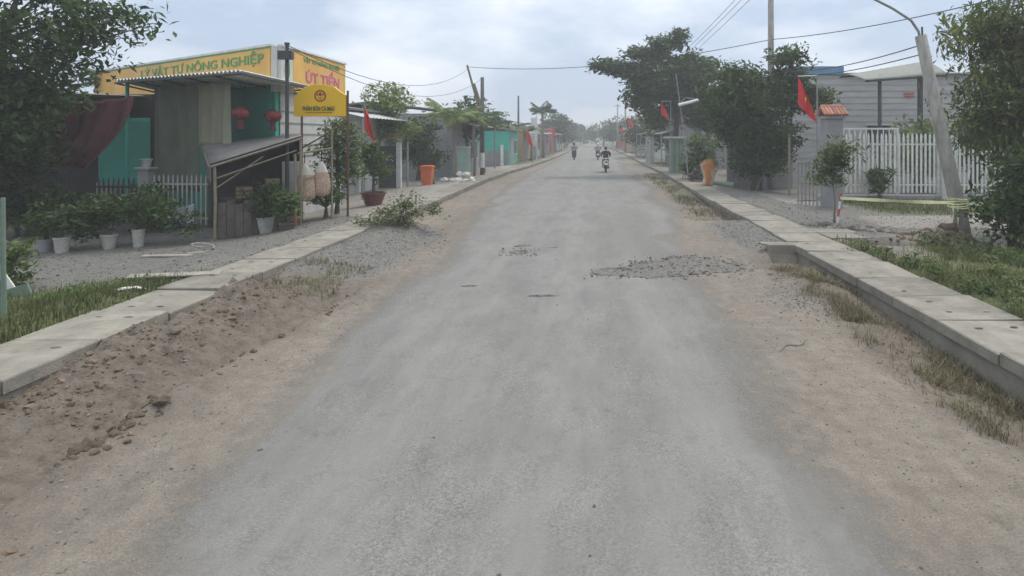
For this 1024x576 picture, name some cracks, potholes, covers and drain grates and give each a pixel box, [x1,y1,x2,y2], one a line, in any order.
pothole [584,254,767,280]
